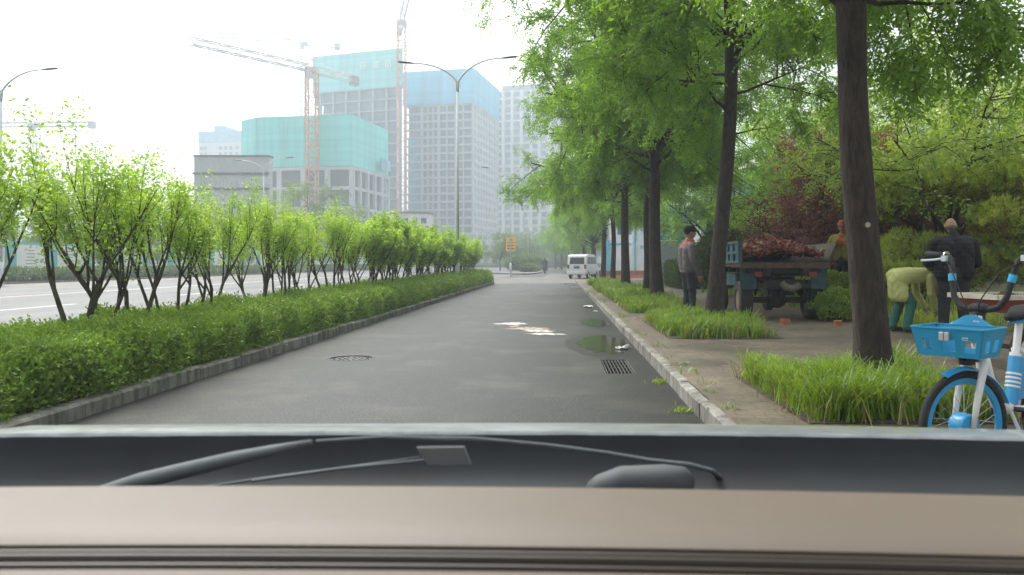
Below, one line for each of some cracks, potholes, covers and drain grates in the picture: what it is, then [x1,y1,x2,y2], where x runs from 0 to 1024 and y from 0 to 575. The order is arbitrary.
drain grate [599,359,637,374]
